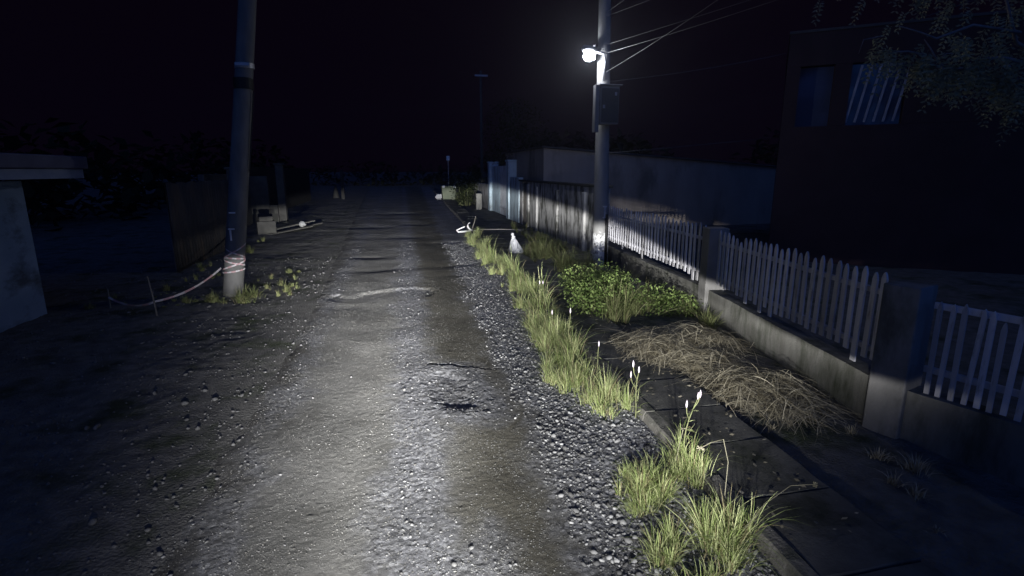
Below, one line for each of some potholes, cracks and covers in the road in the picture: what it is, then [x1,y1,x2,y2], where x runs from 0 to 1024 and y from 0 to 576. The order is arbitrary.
pothole [409,368,486,413]
crack [427,362,514,370]
